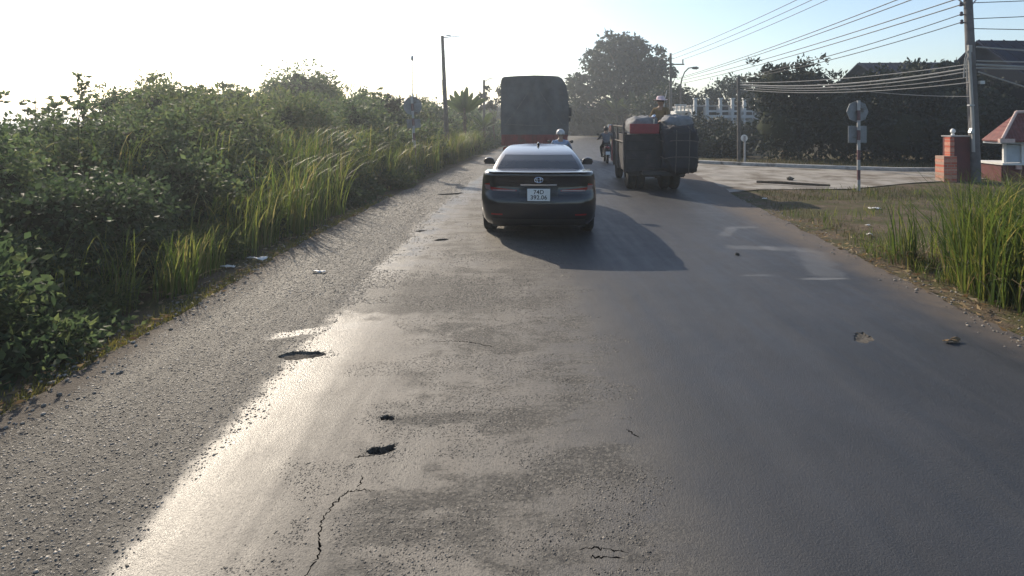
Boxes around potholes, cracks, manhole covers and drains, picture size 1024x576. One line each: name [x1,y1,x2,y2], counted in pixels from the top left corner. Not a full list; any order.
crack [304,475,374,576]
pothole [277,351,325,360]
crack [580,546,628,559]
pothole [366,444,396,455]
pothole [853,332,874,343]
